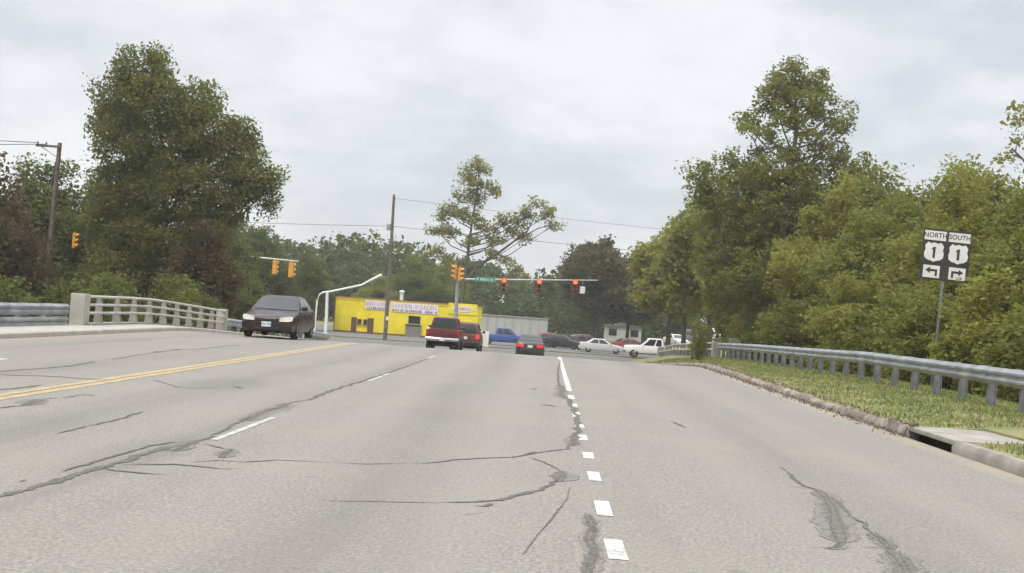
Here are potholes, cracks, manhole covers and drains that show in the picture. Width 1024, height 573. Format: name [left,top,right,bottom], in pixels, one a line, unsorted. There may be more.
crack [0,358,606,573]
drain grate [906,425,1024,453]
crack [783,468,930,573]
